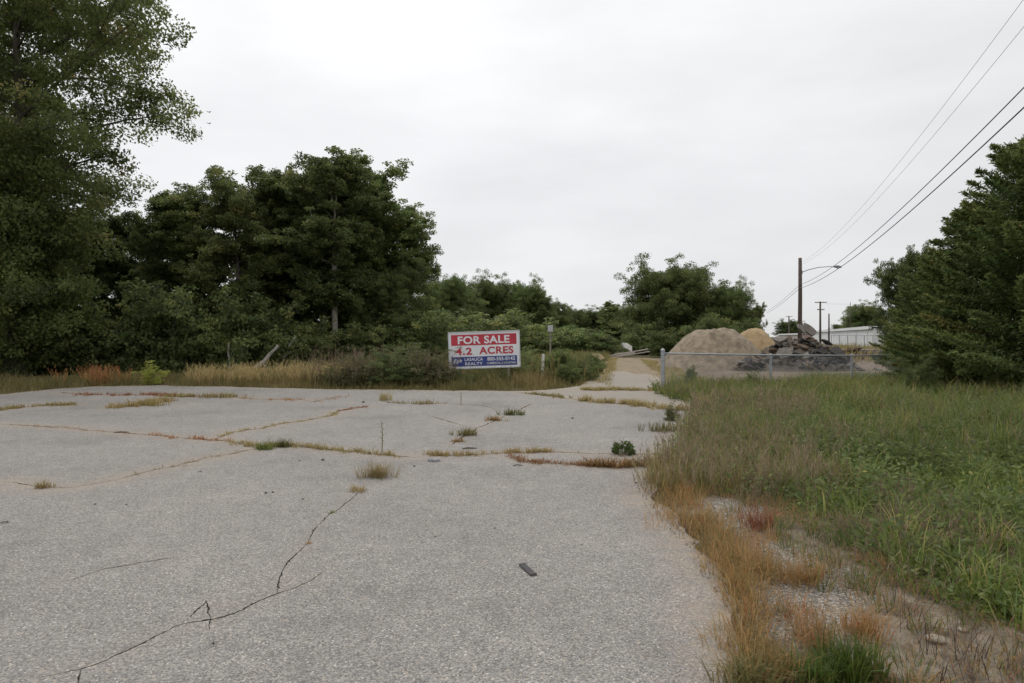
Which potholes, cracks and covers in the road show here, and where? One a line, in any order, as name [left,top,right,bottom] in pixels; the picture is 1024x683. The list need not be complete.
crack [43,492,359,683]
crack [0,398,408,488]
crack [379,400,647,465]
